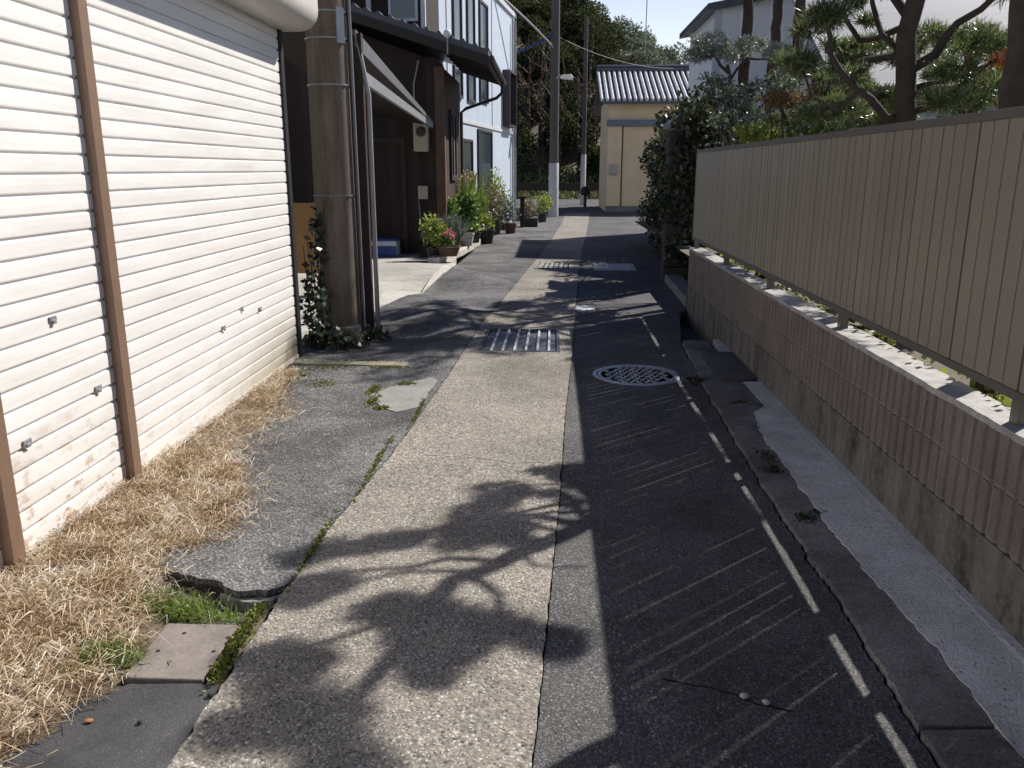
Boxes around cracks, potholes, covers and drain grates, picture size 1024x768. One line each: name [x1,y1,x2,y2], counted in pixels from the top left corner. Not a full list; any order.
drain grate [533,262,576,270]
crack [663,679,794,712]
drain grate [477,328,560,352]
manhole cover [593,365,680,386]
